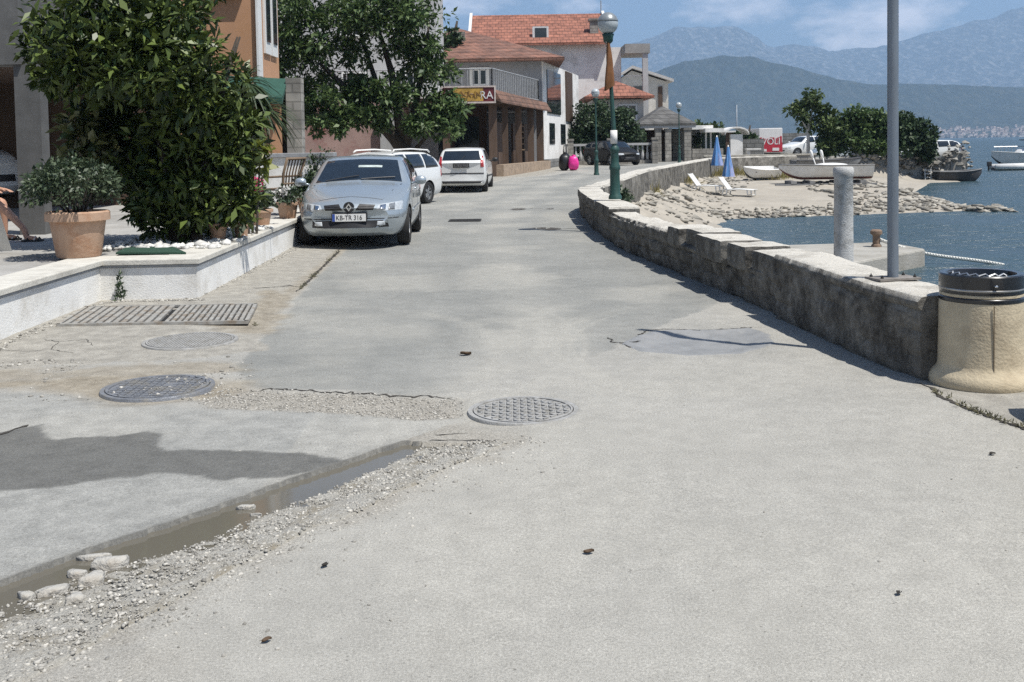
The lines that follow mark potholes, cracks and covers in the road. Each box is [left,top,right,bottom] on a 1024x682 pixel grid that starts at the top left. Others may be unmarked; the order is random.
manhole cover [467,396,579,426]
manhole cover [141,332,238,351]
pothole [0,441,508,682]
manhole cover [99,374,215,403]
drain grate [56,303,258,327]
